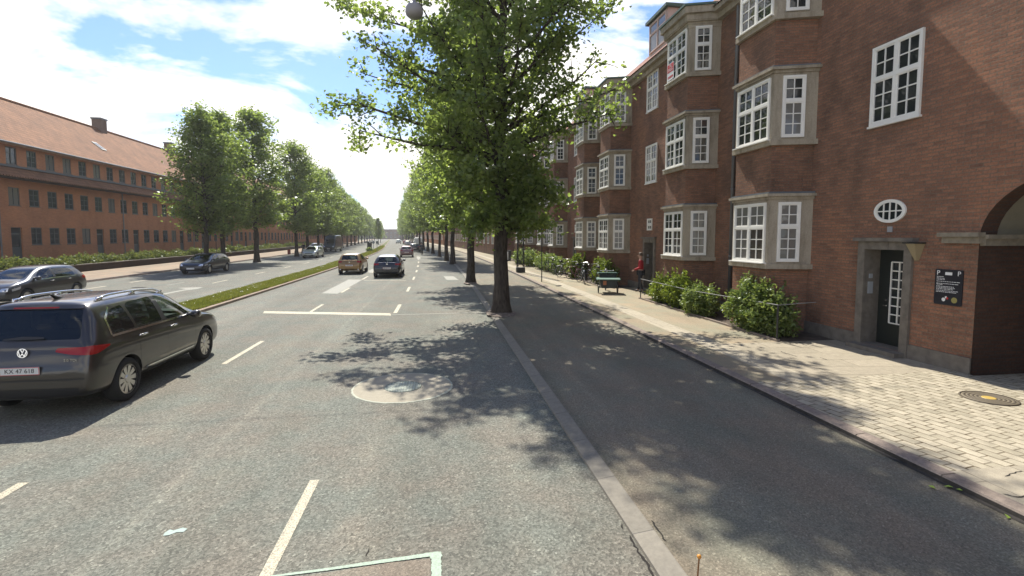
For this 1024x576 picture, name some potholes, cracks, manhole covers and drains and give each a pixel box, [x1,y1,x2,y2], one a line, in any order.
manhole cover [958,391,1021,406]
